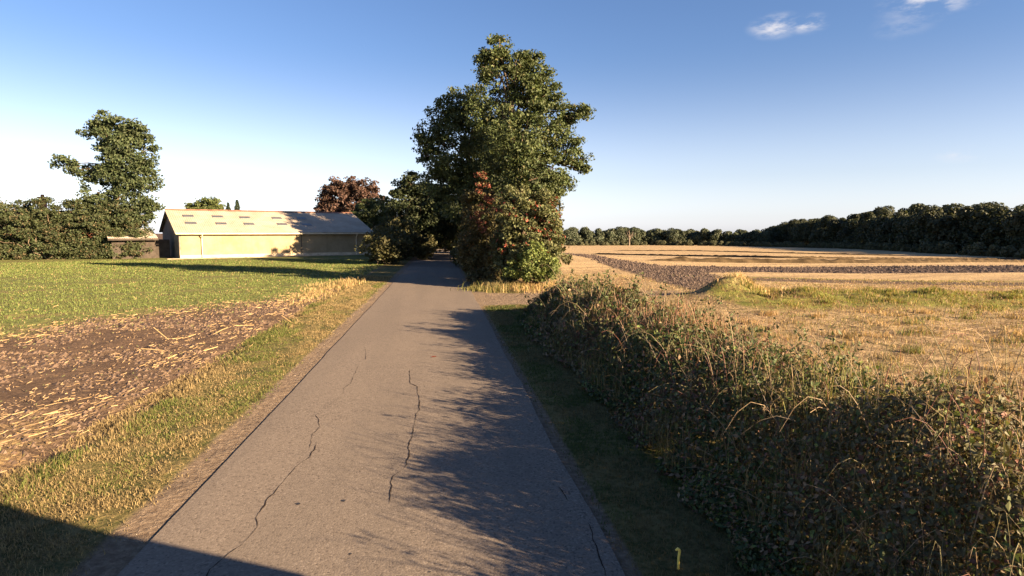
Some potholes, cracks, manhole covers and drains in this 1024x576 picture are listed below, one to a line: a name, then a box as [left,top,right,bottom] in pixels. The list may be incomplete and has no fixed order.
crack [206,400,336,576]
crack [389,371,420,503]
